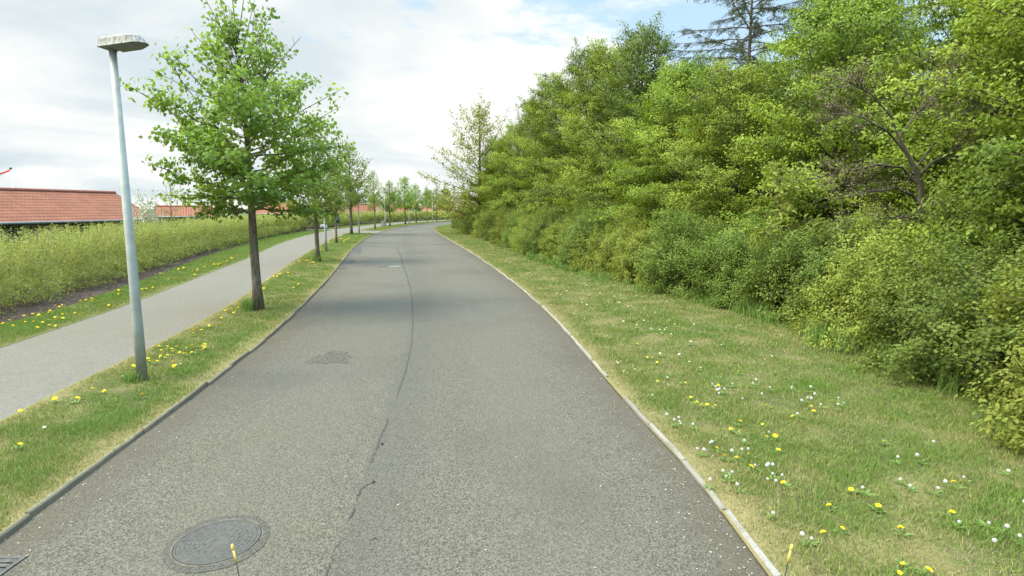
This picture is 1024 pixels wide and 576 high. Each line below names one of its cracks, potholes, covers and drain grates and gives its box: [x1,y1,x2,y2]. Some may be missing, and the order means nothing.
crack [326,417,389,575]
drain grate [0,556,27,576]
manhole cover [163,515,270,573]
